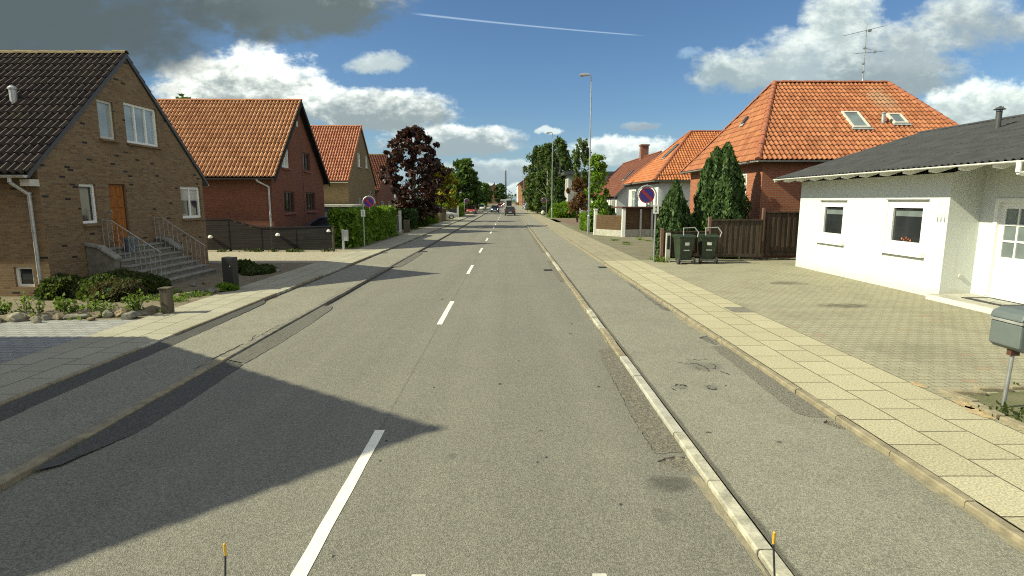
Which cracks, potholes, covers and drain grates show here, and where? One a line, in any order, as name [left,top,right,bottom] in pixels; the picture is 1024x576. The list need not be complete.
crack [672,359,730,390]
